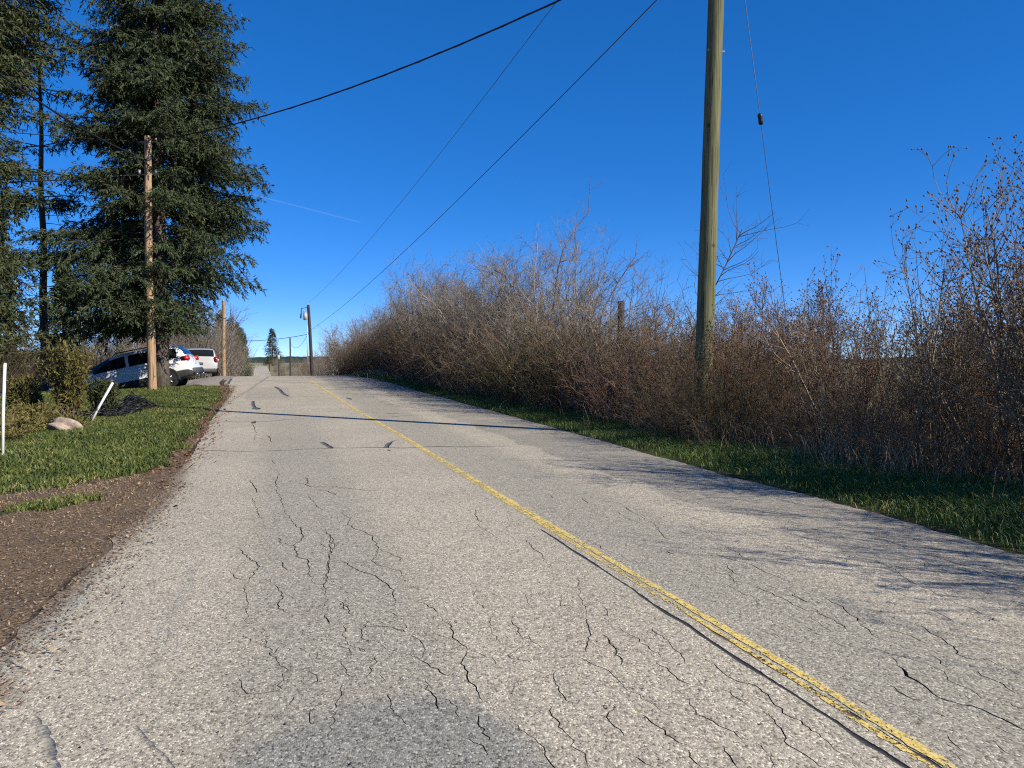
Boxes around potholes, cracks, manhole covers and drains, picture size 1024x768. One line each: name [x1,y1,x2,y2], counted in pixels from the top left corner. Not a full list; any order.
crack [195,418,1024,768]
